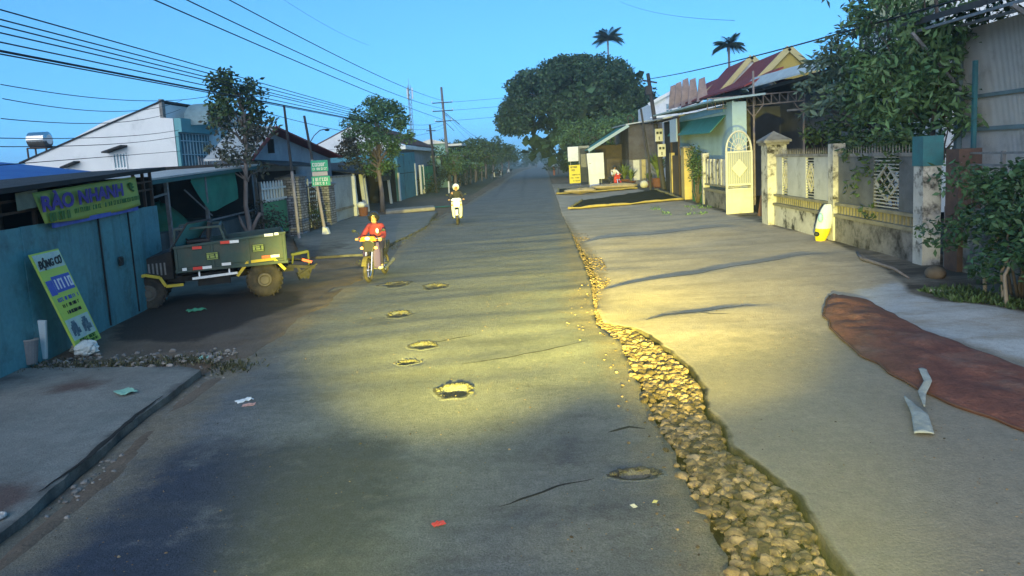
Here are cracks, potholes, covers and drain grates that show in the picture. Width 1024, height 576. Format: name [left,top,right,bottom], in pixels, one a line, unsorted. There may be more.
pothole [602,466,668,482]
pothole [430,381,476,401]
crack [464,341,584,364]
crack [499,478,594,507]
pothole [421,283,451,291]
pothole [374,281,415,289]
pothole [405,341,440,351]
pothole [384,310,415,319]
